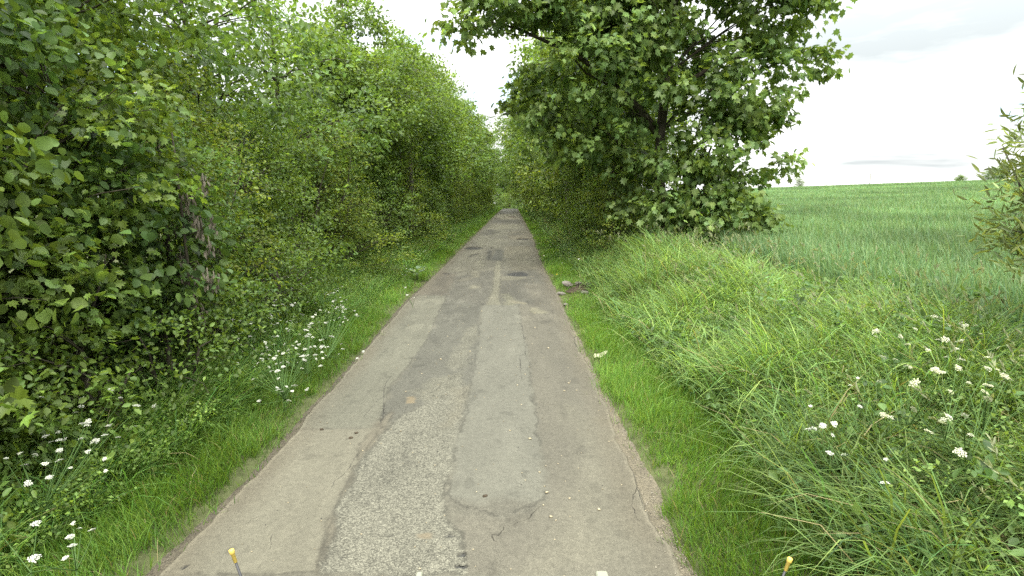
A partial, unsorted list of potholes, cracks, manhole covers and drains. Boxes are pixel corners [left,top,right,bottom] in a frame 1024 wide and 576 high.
crack [624,454,659,530]
crack [488,504,545,545]
crack [359,373,396,425]
